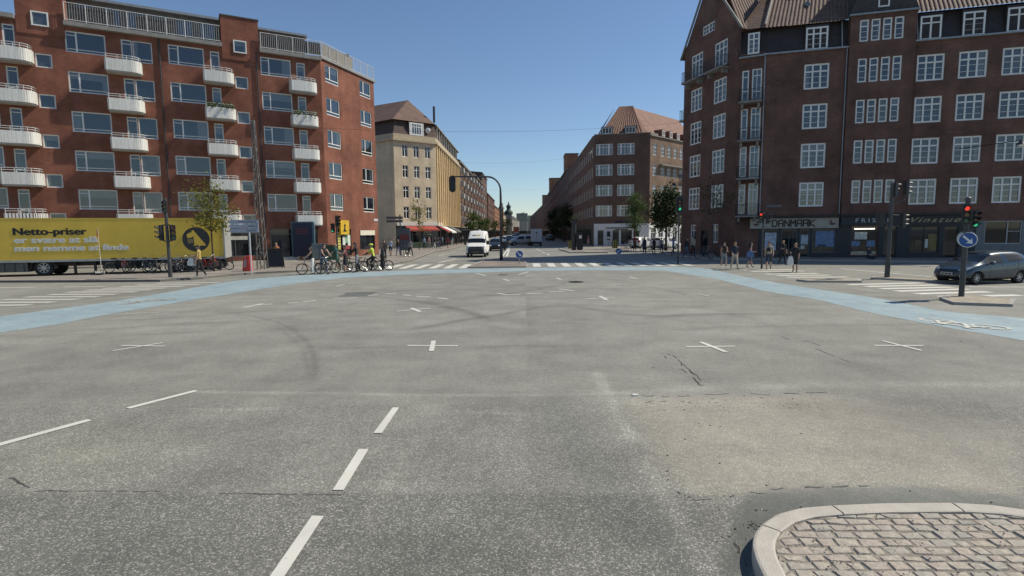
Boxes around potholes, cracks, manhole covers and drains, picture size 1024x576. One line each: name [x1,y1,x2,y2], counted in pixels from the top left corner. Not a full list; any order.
crack [641,354,828,403]
